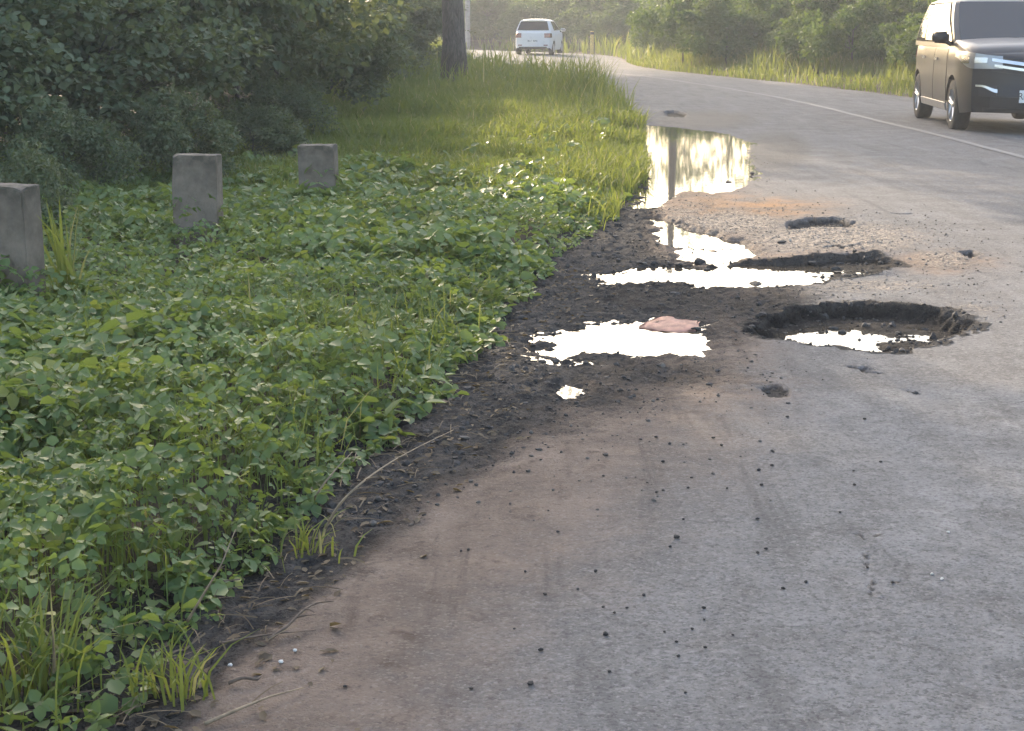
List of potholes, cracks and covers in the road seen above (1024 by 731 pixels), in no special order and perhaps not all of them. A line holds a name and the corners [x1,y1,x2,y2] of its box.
pothole [659,110,689,118]
pothole [732,299,993,355]
pothole [578,249,912,290]
pothole [778,216,863,230]
pothole [633,124,764,209]
